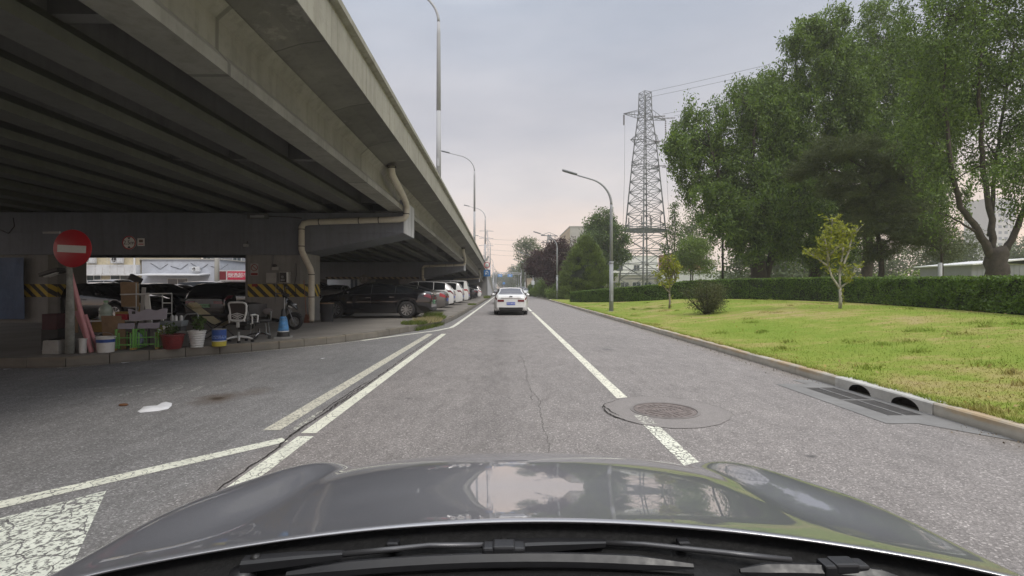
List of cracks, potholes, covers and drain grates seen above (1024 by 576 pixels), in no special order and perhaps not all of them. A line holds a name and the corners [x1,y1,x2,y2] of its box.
manhole cover [604,397,731,428]
drain grate [777,376,1022,442]
